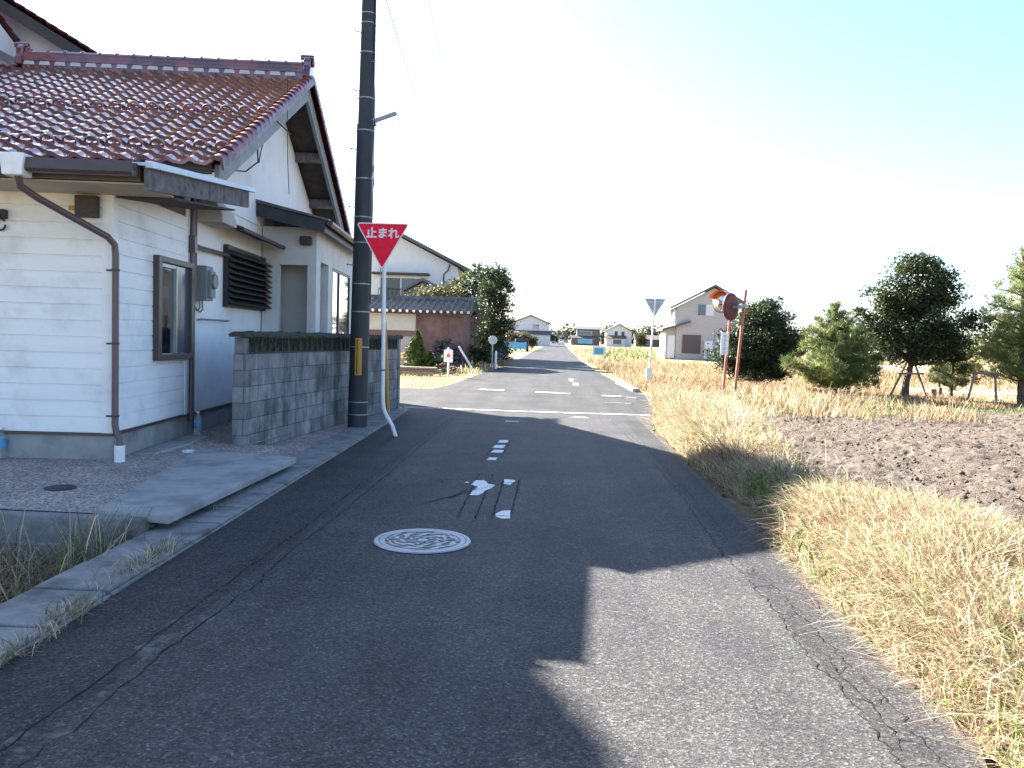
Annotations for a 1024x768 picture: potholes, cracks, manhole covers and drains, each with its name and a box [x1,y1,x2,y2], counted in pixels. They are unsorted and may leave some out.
crack [613,423,949,768]
crack [426,440,520,519]
manhole cover [374,529,471,554]
